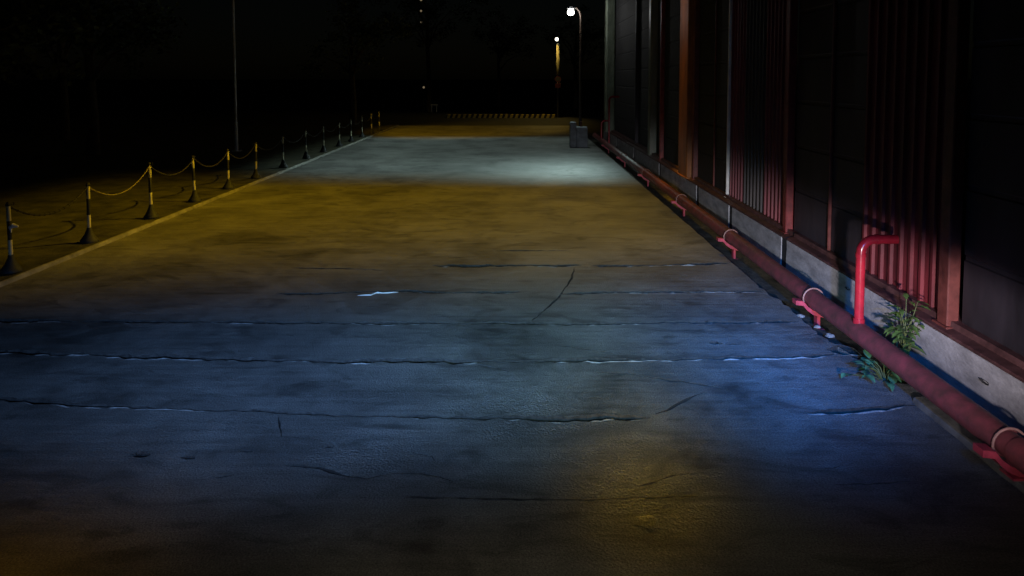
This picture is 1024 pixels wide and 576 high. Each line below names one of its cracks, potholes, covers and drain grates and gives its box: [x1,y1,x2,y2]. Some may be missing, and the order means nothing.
crack [800,404,915,415]
crack [0,250,835,439]
crack [290,441,696,501]
